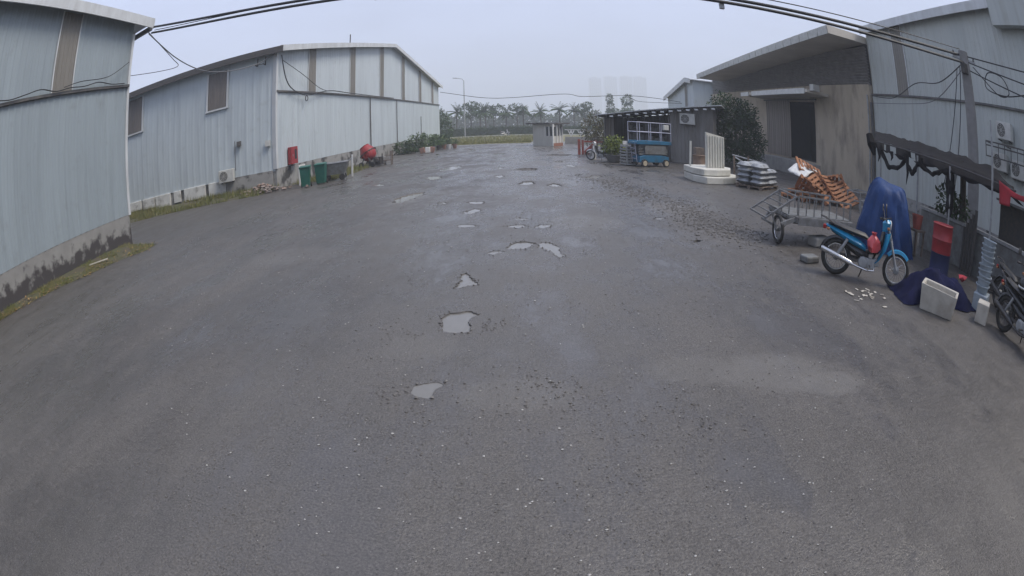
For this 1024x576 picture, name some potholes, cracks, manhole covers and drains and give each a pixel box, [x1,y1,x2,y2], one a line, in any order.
pothole [453,272,480,288]
pothole [438,310,481,334]
pothole [506,240,537,249]
pothole [406,380,447,399]
pothole [392,192,425,203]
pothole [535,241,566,258]
